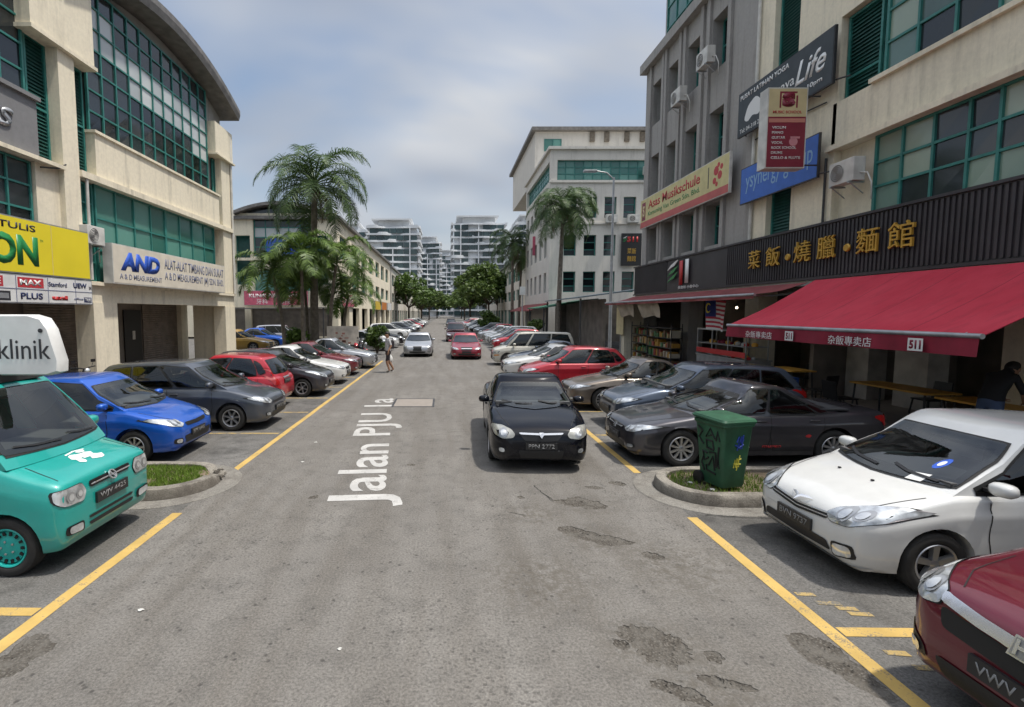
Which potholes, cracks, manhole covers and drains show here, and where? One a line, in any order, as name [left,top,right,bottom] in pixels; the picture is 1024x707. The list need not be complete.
pothole [703,651,726,664]
pothole [0,633,57,679]
pothole [649,679,713,707]
pothole [558,526,635,547]
manhole cover [391,398,435,407]
pothole [784,633,901,704]
pothole [696,675,759,692]
pothole [614,624,694,670]
pothole [641,551,665,560]
